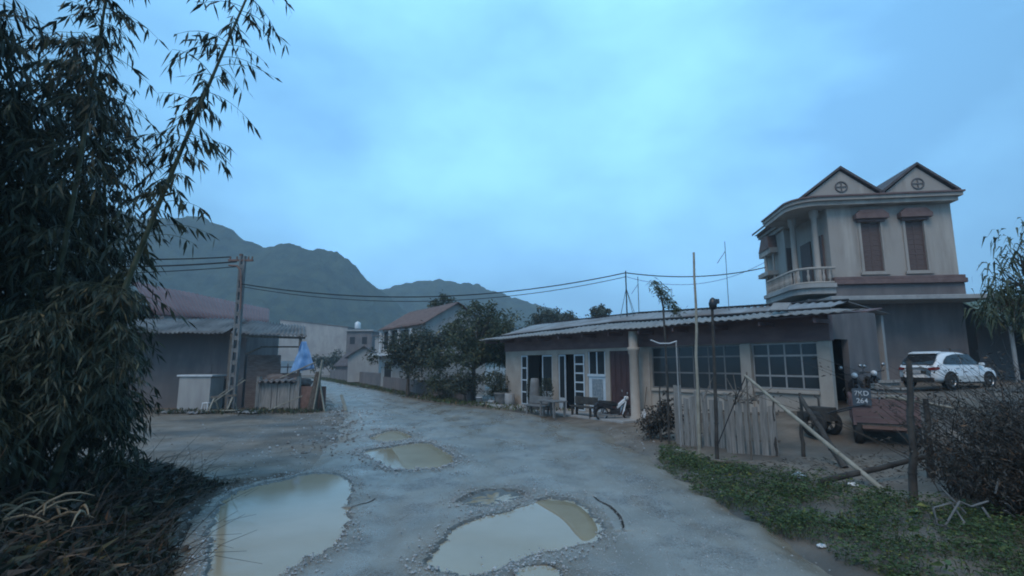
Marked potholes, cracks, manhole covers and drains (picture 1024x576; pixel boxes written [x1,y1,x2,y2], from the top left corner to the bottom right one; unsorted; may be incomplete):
pothole [174,467,380,576]
pothole [354,427,422,444]
crack [341,498,385,509]
pothole [387,490,646,576]
pothole [338,438,477,475]
pothole [428,481,559,512]
crack [585,496,635,531]
